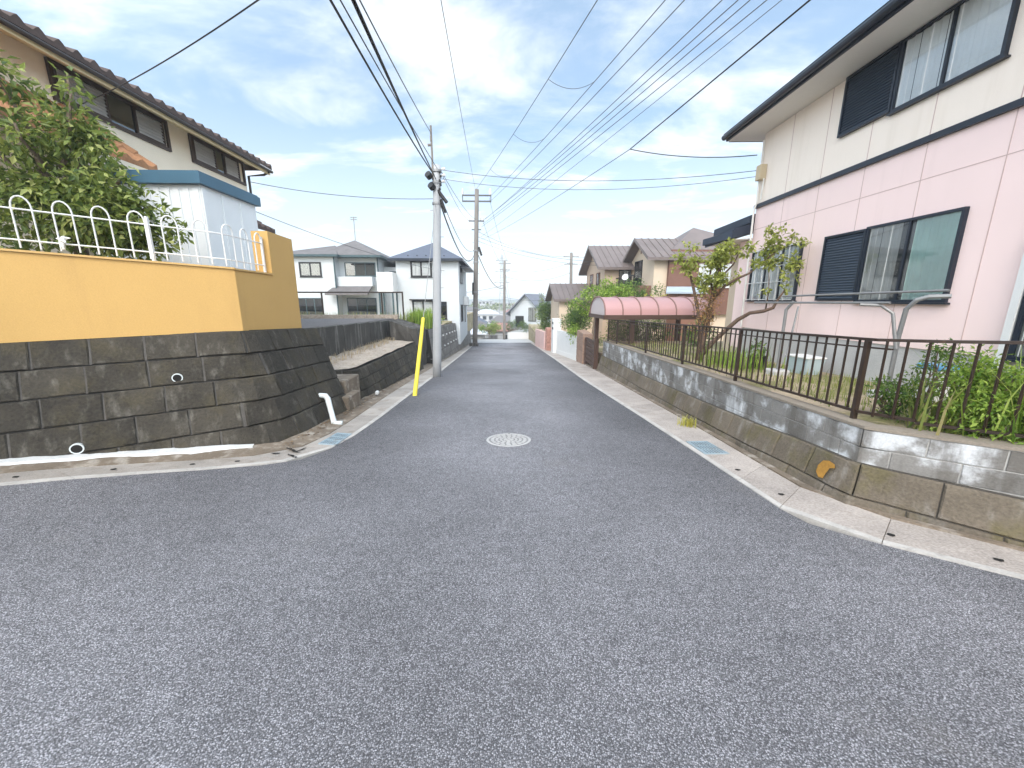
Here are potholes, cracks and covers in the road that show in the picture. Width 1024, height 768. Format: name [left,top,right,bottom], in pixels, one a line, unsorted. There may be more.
drain grate [318,433,352,446]
manhole cover [486,433,531,447]
drain grate [686,441,729,454]
